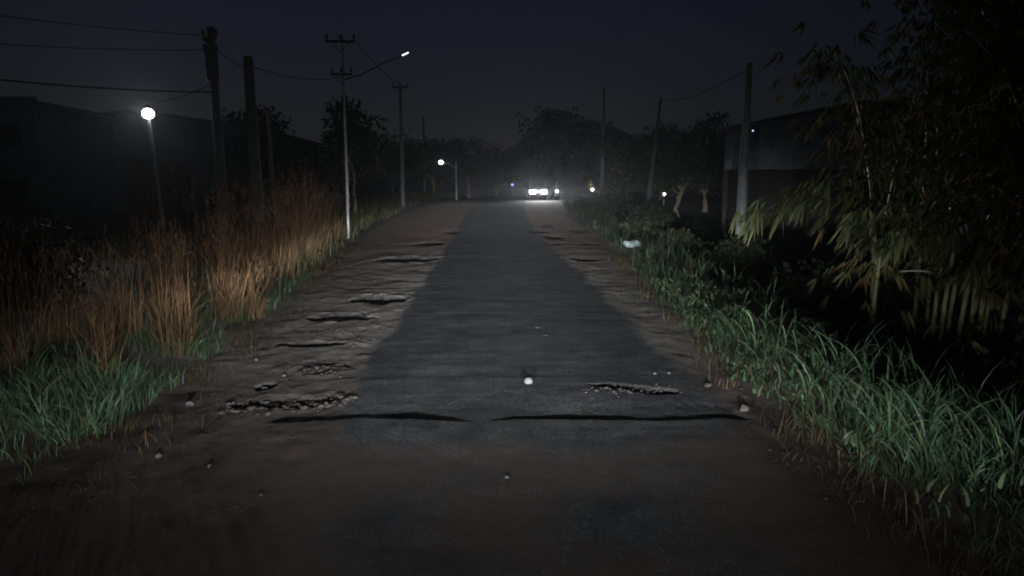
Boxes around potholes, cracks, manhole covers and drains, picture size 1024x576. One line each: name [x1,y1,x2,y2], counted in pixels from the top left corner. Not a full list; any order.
pothole [278,308,401,328]
pothole [196,387,380,417]
pothole [392,239,468,248]
pothole [328,291,438,308]
pothole [521,233,587,241]
pothole [549,255,616,264]
pothole [357,254,465,265]
pothole [225,375,290,396]
pothole [566,379,707,399]
pothole [253,335,371,353]
